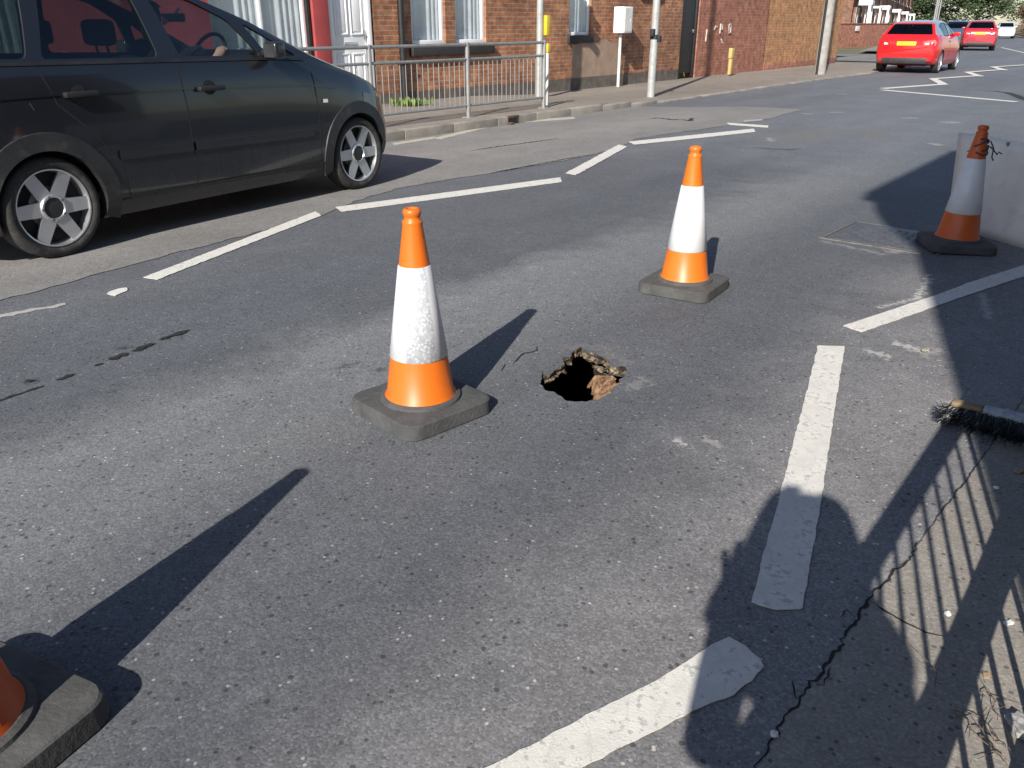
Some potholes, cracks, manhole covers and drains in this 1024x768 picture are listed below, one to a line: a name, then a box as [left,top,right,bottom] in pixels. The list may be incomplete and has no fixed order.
manhole cover [818,221,942,257]
crack [754,397,1024,768]
pothole [540,347,627,402]
